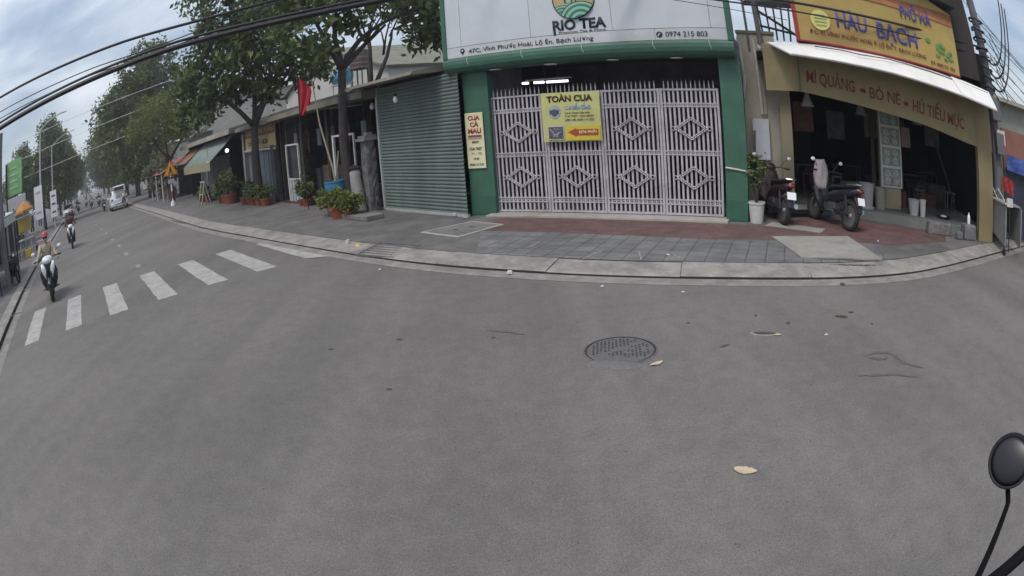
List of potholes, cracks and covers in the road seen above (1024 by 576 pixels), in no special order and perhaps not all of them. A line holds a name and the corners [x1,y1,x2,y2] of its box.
drain grate [355,242,421,258]
utility cover [420,221,504,238]
manhole cover [583,336,658,370]
crack [857,351,923,377]
